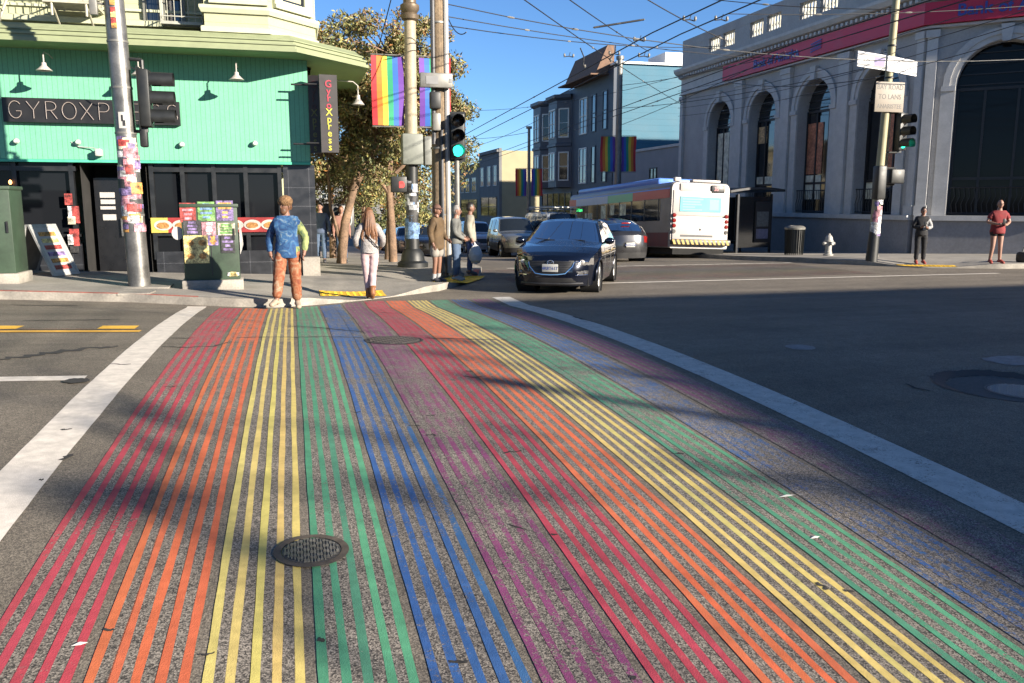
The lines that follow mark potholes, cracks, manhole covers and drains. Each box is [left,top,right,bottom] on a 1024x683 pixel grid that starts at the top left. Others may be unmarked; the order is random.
manhole cover [273,534,349,567]
manhole cover [365,336,423,344]
